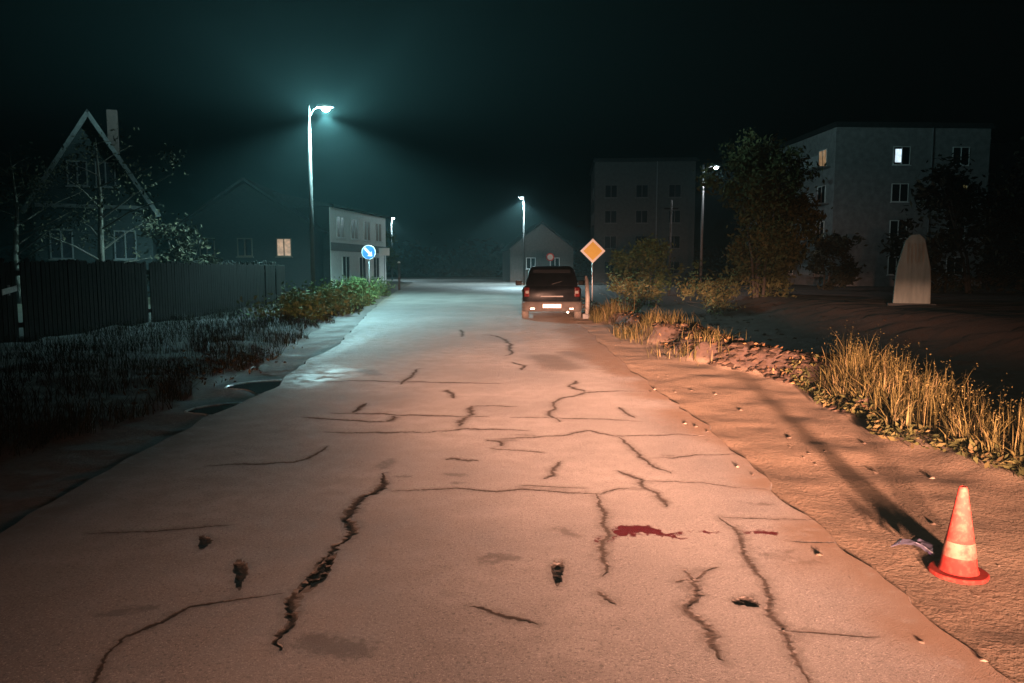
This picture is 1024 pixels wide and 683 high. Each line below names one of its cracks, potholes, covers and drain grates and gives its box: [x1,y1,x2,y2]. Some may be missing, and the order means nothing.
crack [675,516,881,683]
pothole [731,596,761,607]
pothole [198,535,213,550]
crack [91,369,765,683]
crack [491,335,527,370]
pothole [233,559,249,591]
pothole [550,560,565,586]
